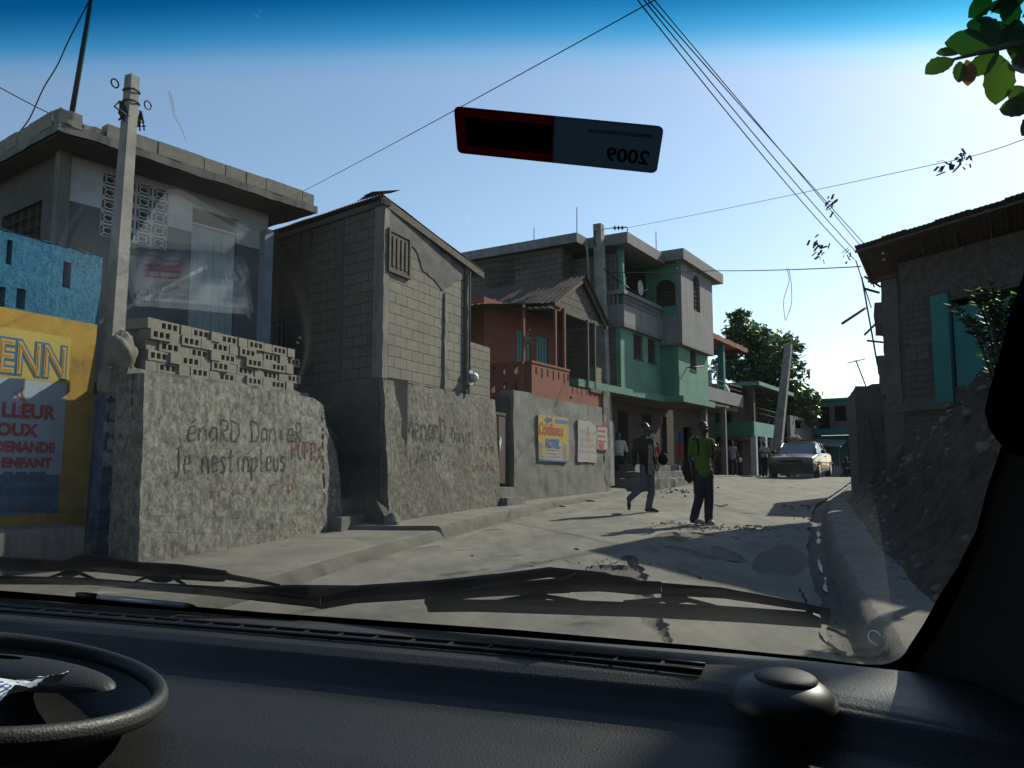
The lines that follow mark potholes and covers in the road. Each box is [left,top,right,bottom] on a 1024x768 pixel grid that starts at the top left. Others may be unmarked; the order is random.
pothole [581,555,649,581]
